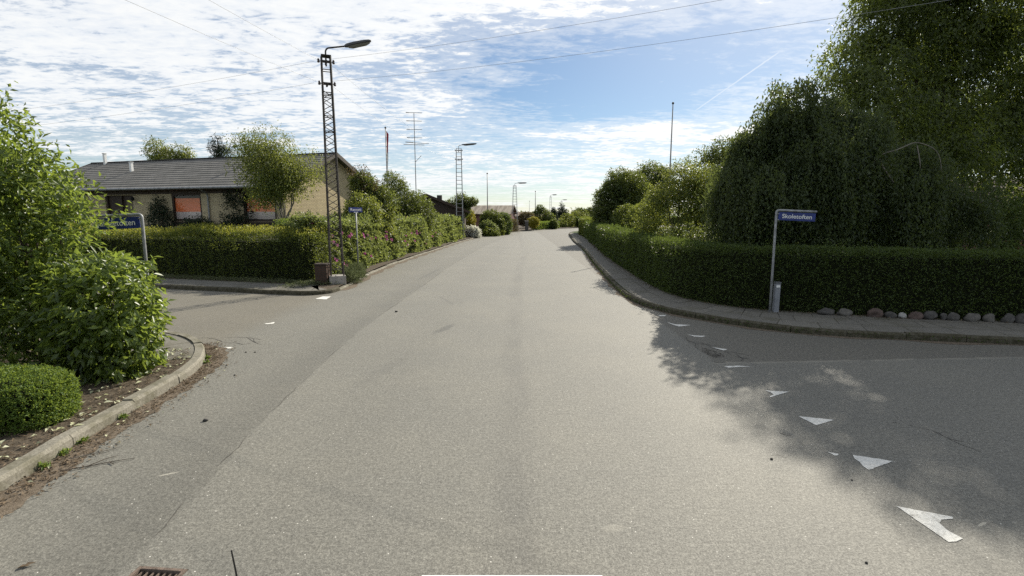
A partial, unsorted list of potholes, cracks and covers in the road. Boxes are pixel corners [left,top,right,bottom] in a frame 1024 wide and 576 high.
drain grate [129,566,188,576]
